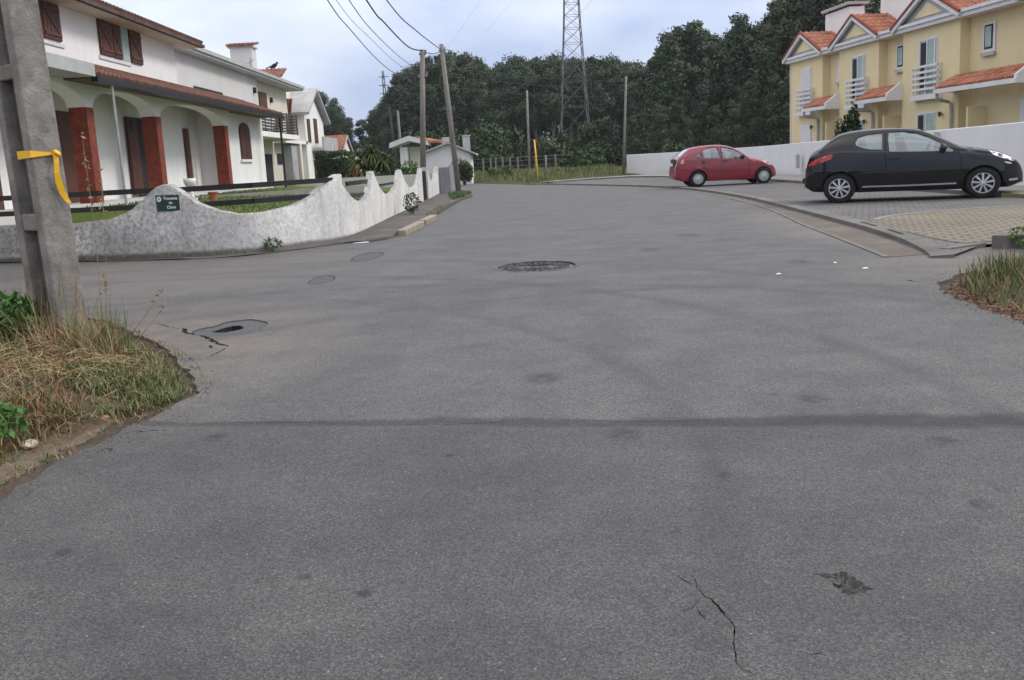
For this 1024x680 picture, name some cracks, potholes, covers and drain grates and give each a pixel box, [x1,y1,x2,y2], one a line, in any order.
manhole cover [493,260,580,272]
pothole [813,571,873,597]
manhole cover [307,275,336,284]
crack [678,574,755,675]
manhole cover [350,252,384,262]
